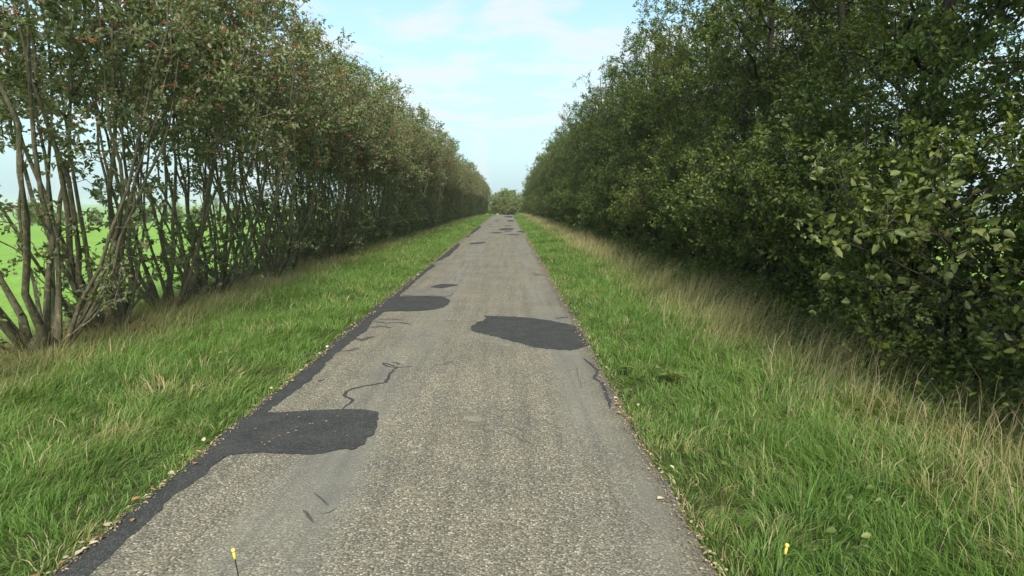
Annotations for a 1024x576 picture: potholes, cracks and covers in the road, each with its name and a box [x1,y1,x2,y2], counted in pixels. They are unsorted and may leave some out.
crack [303,493,336,523]
